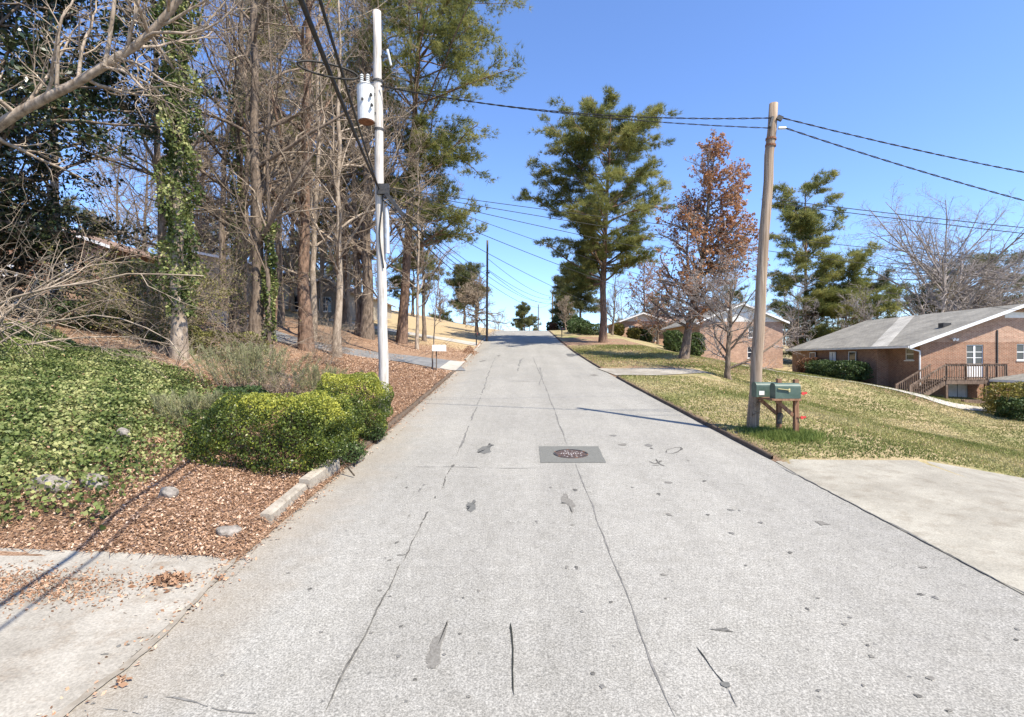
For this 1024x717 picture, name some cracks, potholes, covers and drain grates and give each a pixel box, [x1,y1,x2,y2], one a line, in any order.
crack [698,649,738,708]
manhole cover [553,449,588,458]
